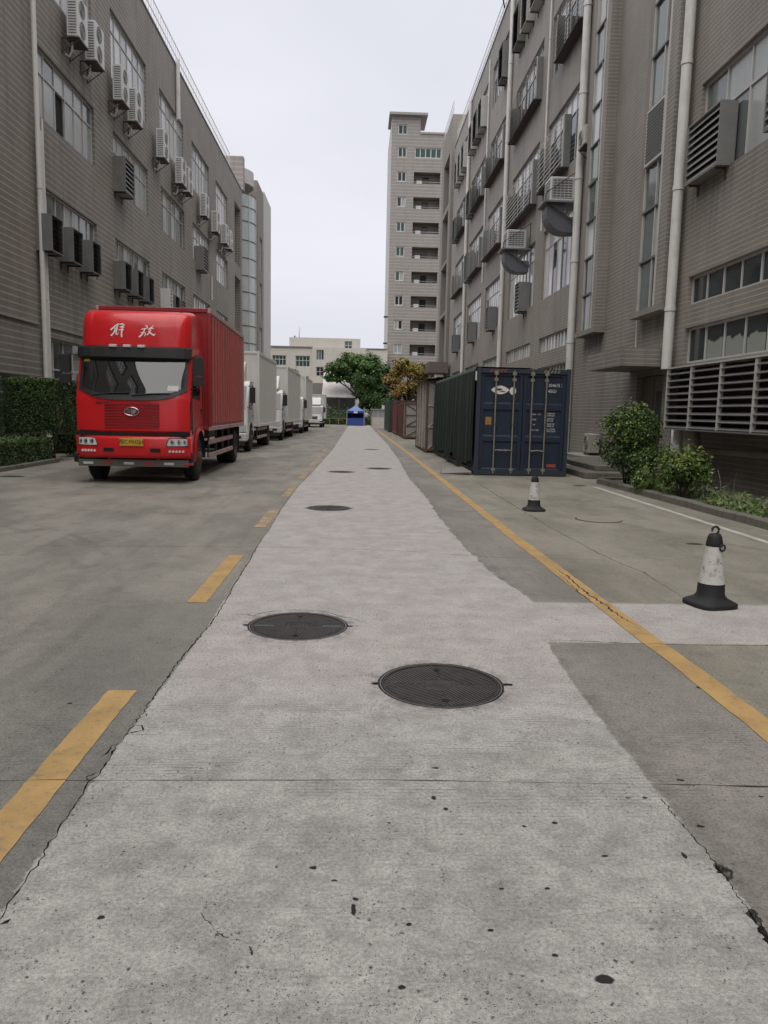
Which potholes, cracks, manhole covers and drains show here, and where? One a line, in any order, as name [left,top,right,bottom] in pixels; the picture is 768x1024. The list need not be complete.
crack [649,788,768,944]
manhole cover [243,612,352,641]
manhole cover [371,663,513,709]
crack [201,913,253,955]
crack [562,573,628,621]
